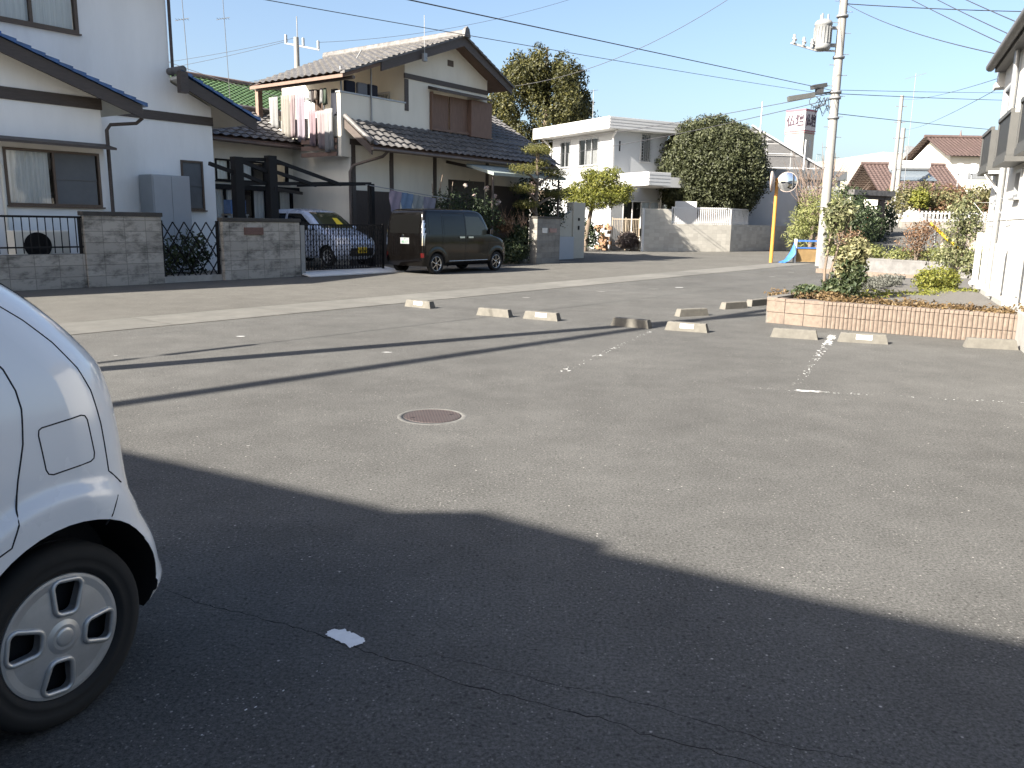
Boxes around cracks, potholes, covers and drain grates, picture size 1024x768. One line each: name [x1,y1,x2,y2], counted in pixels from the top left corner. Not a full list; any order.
manhole cover [397,408,467,425]
crack [167,590,883,768]
